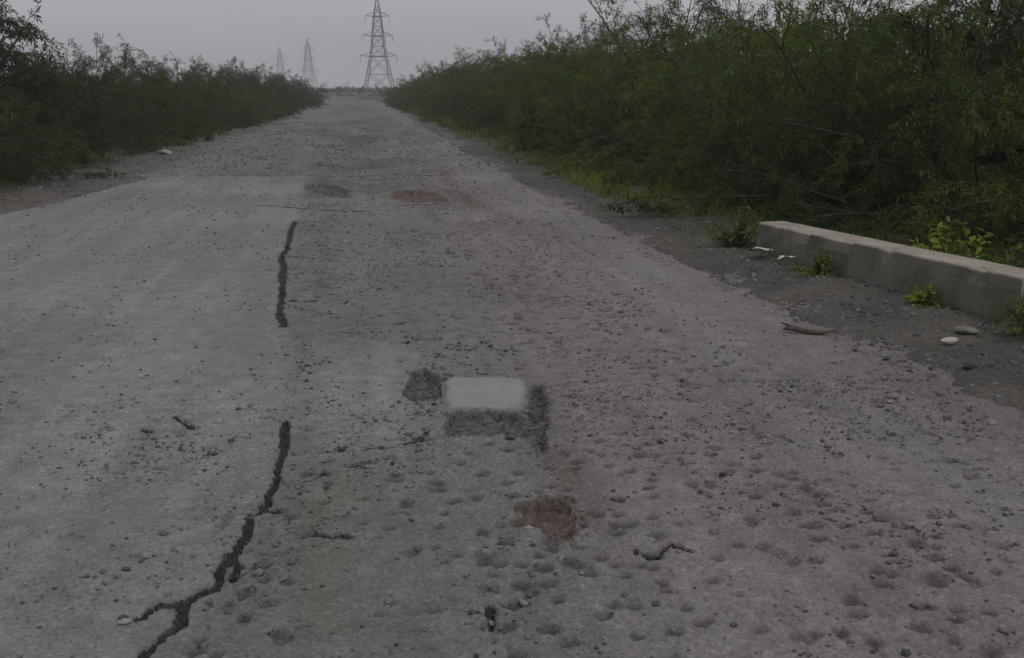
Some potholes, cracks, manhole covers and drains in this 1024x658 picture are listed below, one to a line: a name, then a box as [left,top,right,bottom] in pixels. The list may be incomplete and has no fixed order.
crack [319,431,431,454]
crack [133,420,291,658]
pothole [401,367,448,402]
crack [141,416,196,434]
pothole [443,383,552,456]
crack [633,543,693,561]
crack [259,205,368,328]
